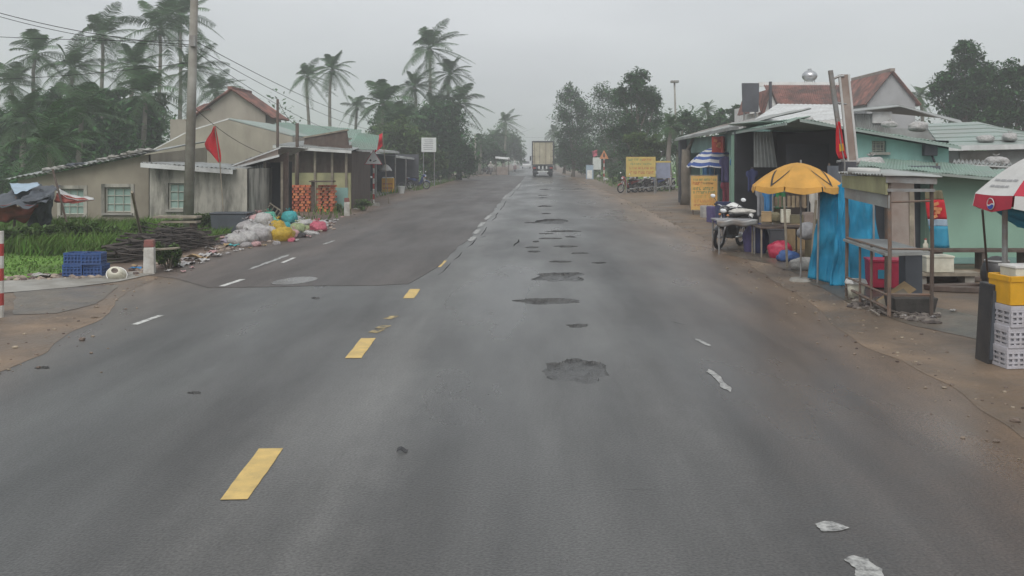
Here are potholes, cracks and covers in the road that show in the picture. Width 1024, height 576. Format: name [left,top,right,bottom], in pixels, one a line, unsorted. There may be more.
pothole [542,358,609,384]
pothole [531,272,585,282]
